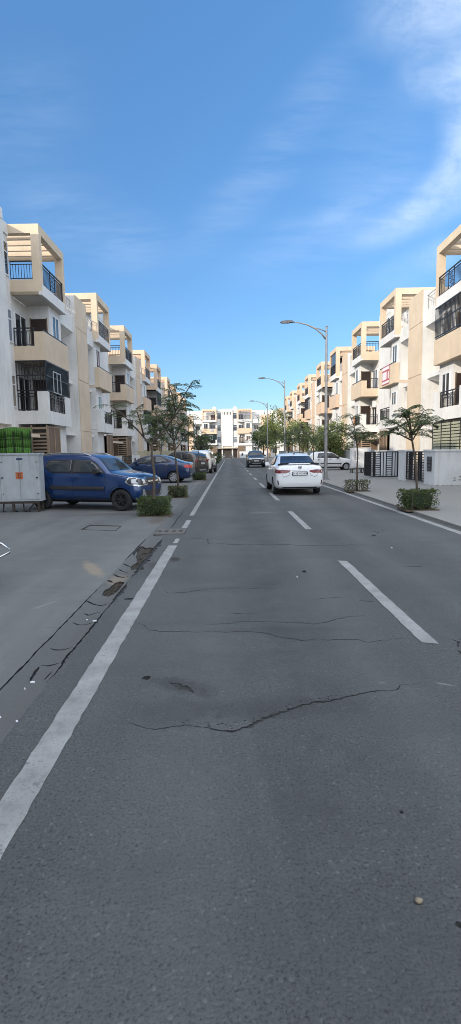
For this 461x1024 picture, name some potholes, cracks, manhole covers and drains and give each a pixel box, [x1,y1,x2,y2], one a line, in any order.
crack [121,683,418,733]
crack [0,510,317,690]
pothole [131,546,153,570]
pothole [102,581,124,597]
pothole [170,682,194,692]
crack [139,600,406,642]
